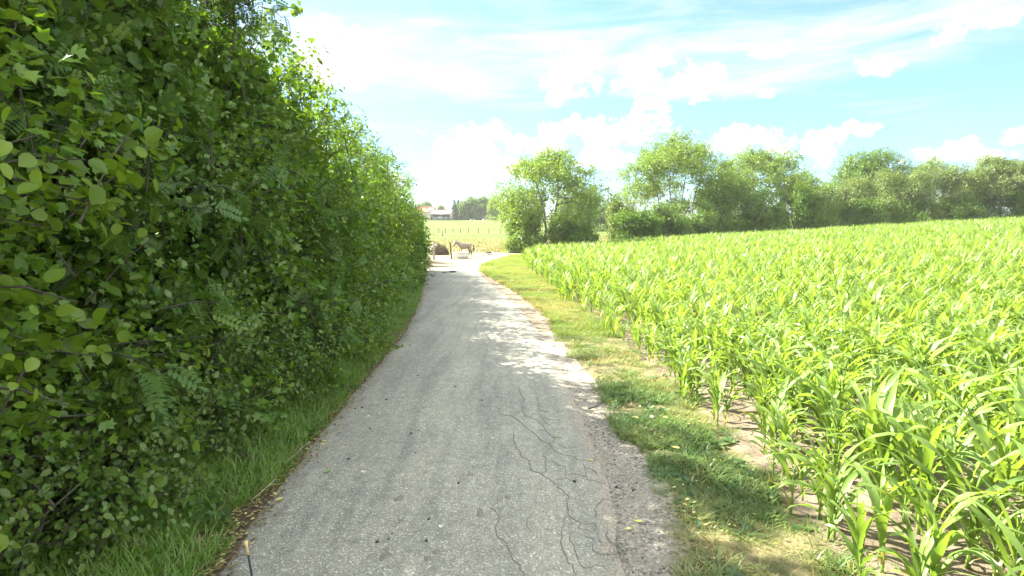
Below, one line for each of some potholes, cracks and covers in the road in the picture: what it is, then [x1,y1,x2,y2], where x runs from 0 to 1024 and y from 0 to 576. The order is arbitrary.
crack [490,387,633,576]
